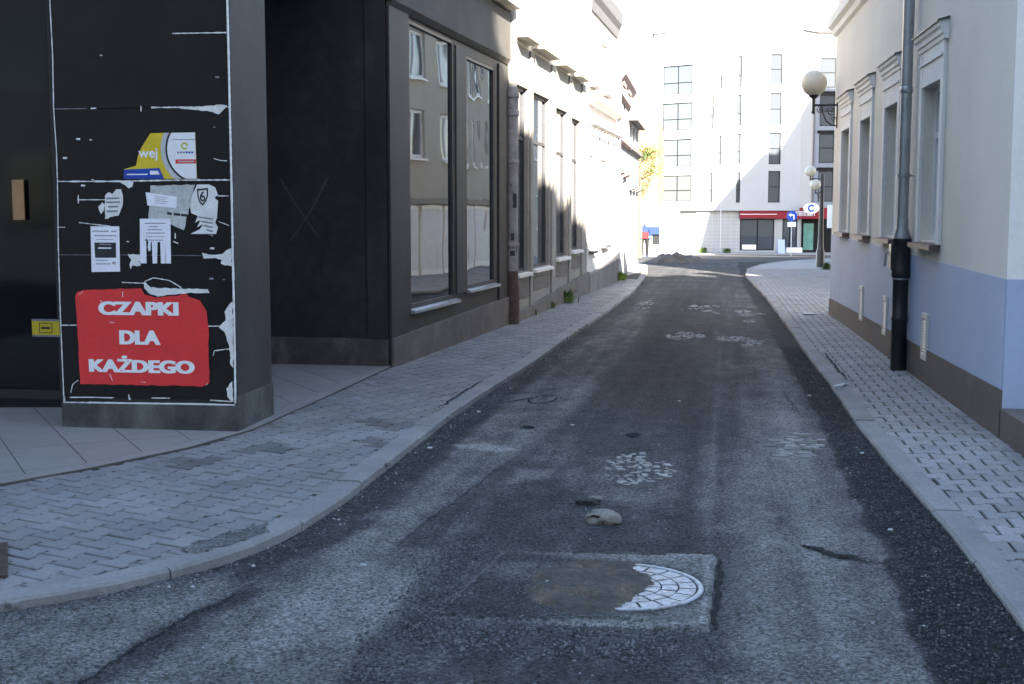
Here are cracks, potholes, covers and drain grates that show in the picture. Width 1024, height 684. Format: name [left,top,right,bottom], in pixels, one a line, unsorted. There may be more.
pothole [667,332,705,340]
pothole [762,425,826,460]
pothole [602,452,676,485]
manhole cover [545,564,704,611]
crack [800,545,889,563]
crack [503,395,558,403]
crack [710,558,725,628]
pothole [718,336,764,347]
